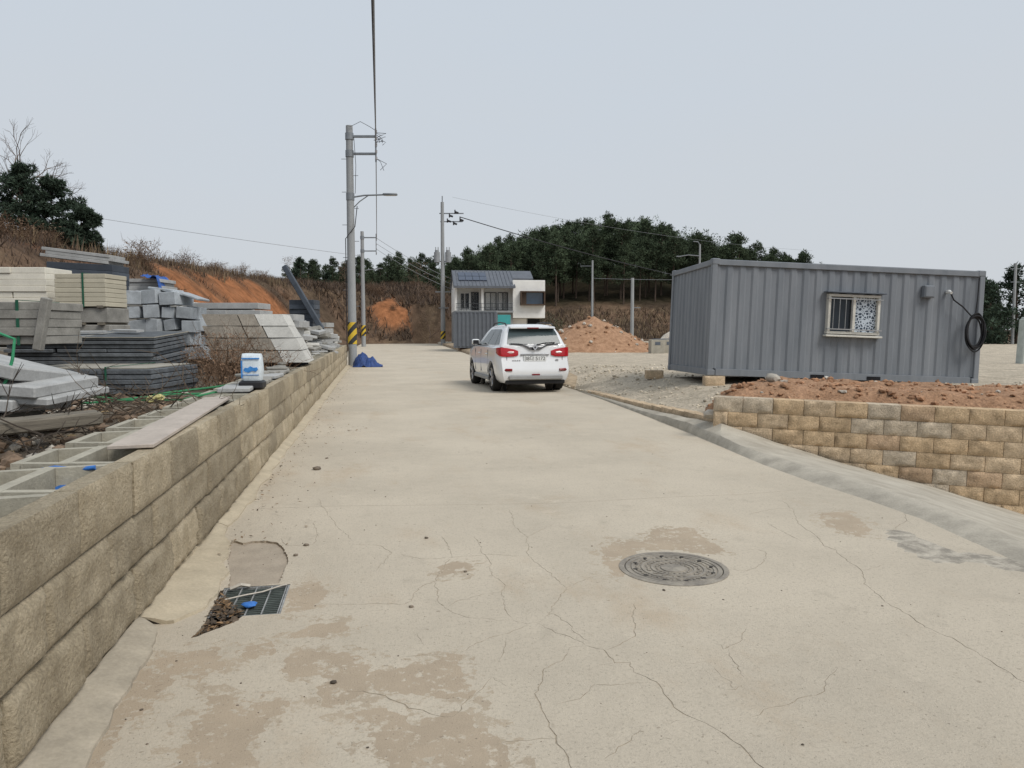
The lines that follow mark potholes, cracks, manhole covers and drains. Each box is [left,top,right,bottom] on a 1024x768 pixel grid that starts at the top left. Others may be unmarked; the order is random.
crack [756,502,1022,681]
crack [749,672,835,718]
crack [305,510,764,768]
manhole cover [619,552,729,586]
drain grate [207,584,290,627]
